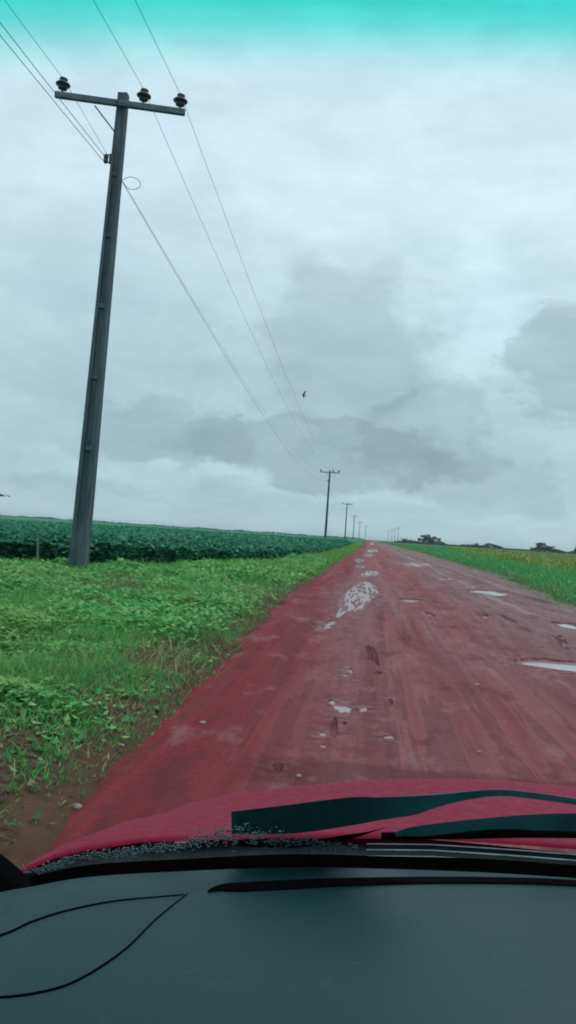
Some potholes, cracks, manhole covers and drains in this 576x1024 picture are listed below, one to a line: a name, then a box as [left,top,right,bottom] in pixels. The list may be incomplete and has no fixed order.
pothole [366,645,380,666]
pothole [358,570,381,578]
pothole [330,716,338,738]
pothole [328,699,354,713]
pothole [550,621,576,629]
pothole [335,580,379,618]
pothole [512,658,576,672]
